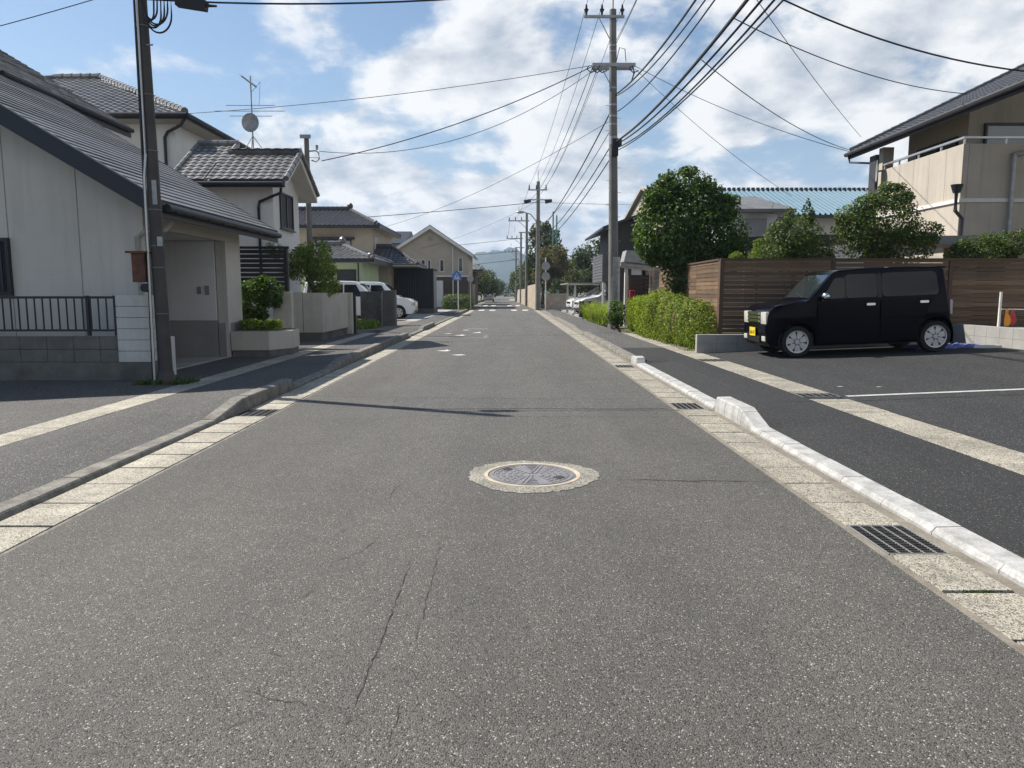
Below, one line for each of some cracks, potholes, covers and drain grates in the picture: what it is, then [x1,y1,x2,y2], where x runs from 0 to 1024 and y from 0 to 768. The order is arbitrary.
crack [338,558,412,747]
crack [388,541,441,745]
drain grate [788,391,841,399]
manhole cover [468,460,600,493]
drain grate [233,409,281,417]
drain grate [847,525,951,555]
